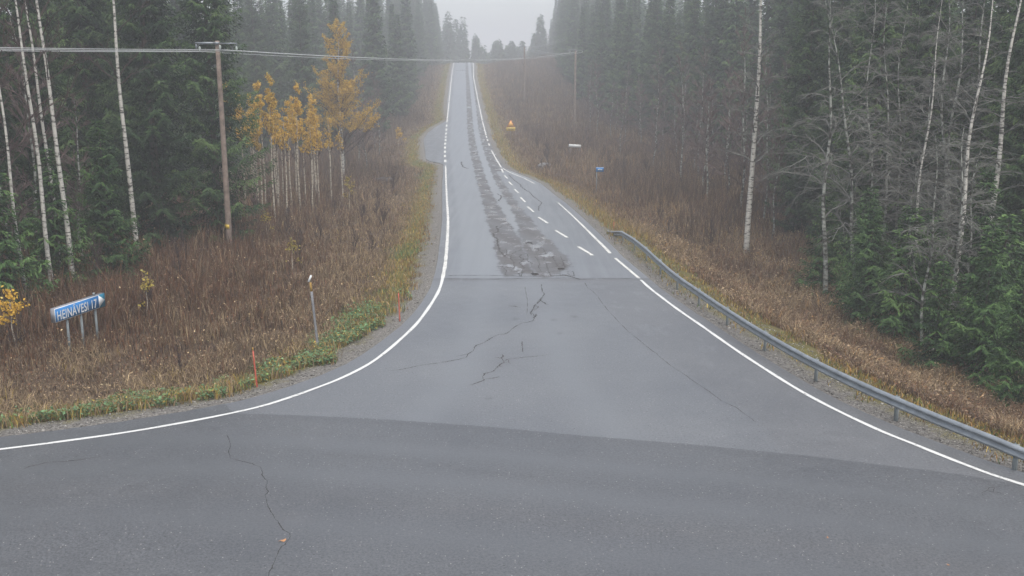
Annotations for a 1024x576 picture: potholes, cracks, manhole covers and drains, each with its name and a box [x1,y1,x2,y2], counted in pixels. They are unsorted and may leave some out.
crack [227,435,290,576]
crack [392,226,574,384]
